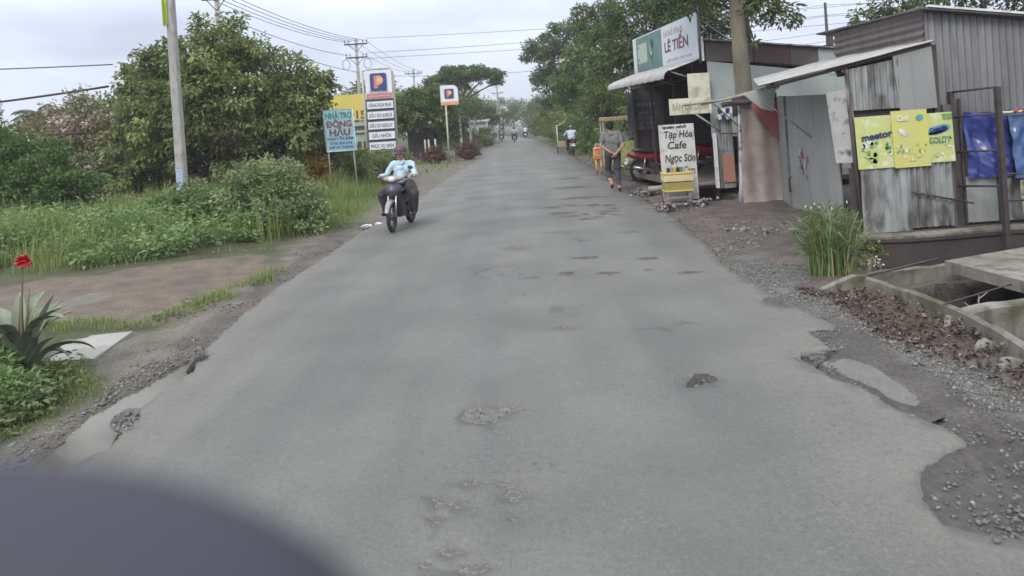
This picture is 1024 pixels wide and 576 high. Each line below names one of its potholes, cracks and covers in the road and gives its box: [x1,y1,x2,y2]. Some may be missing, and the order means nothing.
pothole [448,501,468,510]
pothole [459,406,523,424]
pothole [186,355,211,375]
pothole [795,350,831,367]
pothole [454,564,493,576]
pothole [436,548,469,557]
pothole [429,516,447,527]
pothole [432,495,449,508]
pothole [686,374,719,388]
pothole [109,408,147,435]
pothole [500,489,529,503]
